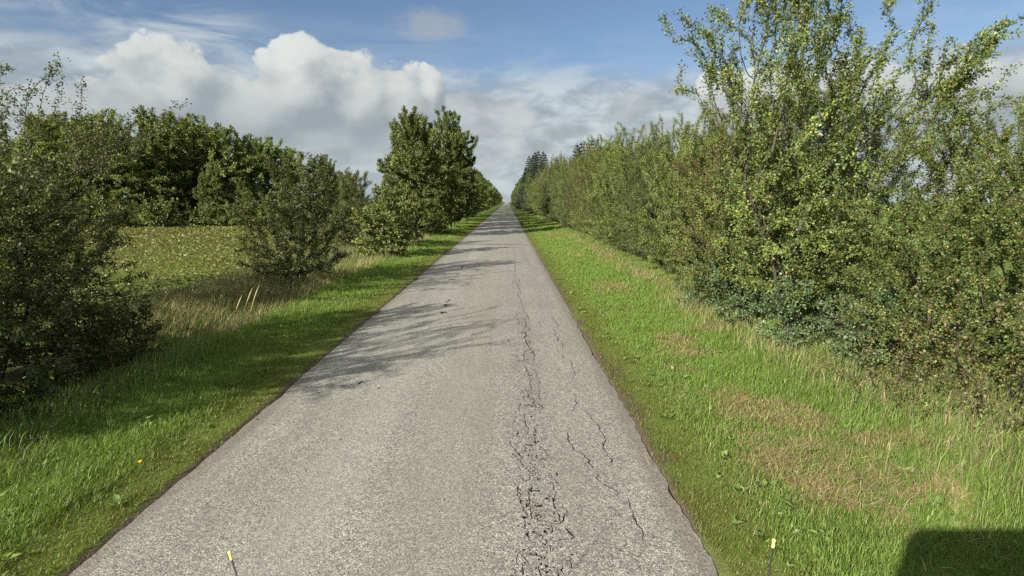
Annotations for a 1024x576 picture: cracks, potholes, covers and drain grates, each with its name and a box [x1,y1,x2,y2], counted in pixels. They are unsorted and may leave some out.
crack [567,395,646,543]
crack [508,262,576,576]
